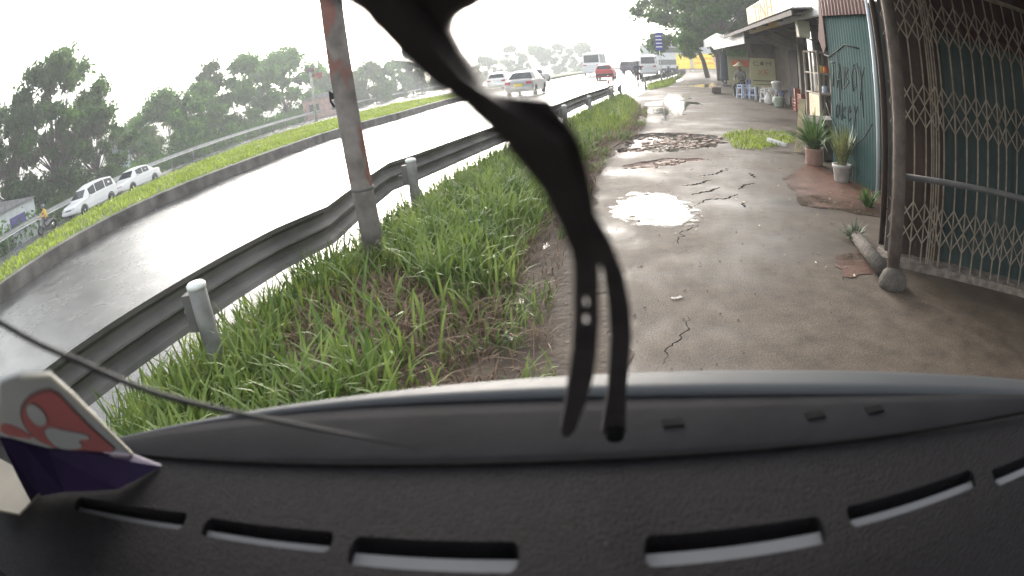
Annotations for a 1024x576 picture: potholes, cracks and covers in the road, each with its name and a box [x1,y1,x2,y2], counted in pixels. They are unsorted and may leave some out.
pothole [621,158,707,169]
crack [663,317,691,364]
pothole [617,133,725,153]
